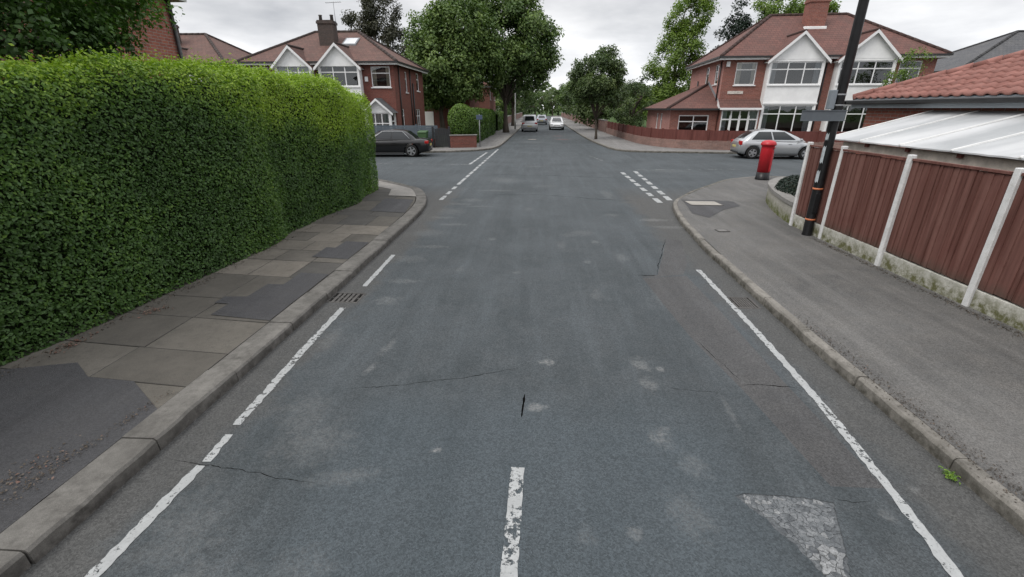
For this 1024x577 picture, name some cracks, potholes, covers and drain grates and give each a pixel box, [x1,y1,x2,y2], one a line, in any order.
drain grate [326,292,366,303]
drain grate [728,297,761,309]
crack [674,349,795,392]
crack [168,459,312,483]
